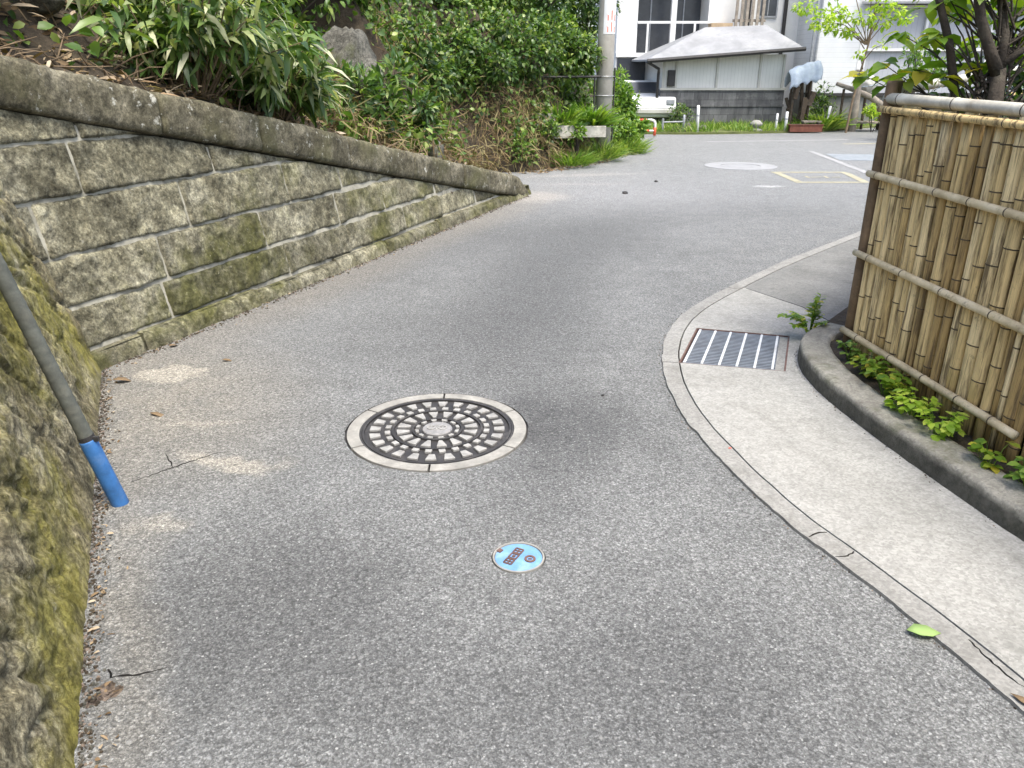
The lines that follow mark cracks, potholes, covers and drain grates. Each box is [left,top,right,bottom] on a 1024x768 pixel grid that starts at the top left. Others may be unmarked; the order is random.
drain grate [679,328,790,371]
crack [132,451,233,482]
utility cover [491,542,546,574]
manhole cover [704,162,778,170]
manhole cover [344,394,528,473]
crack [107,667,167,679]
